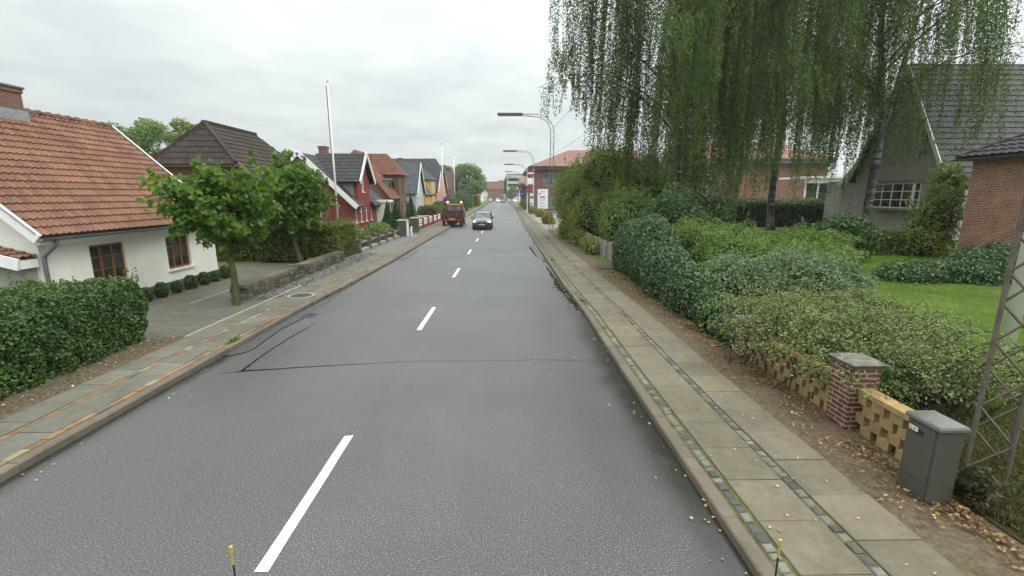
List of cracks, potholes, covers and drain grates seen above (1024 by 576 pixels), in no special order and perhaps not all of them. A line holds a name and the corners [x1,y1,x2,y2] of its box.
crack [529,246,579,311]
crack [228,324,540,373]
